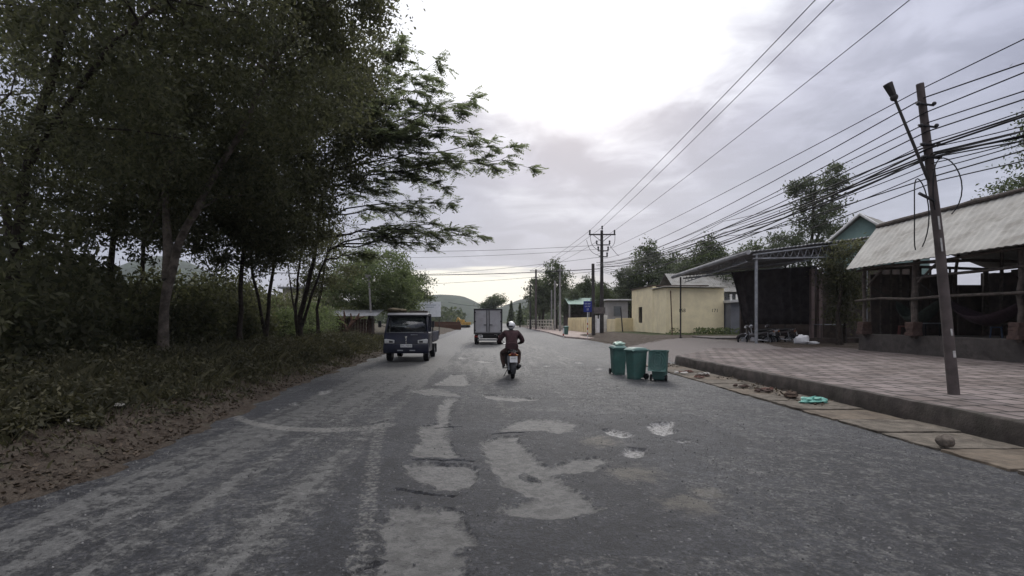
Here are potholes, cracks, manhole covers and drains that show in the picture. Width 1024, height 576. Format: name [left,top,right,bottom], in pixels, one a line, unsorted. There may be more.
pothole [640,421,684,437]
pothole [612,445,653,460]
pothole [596,427,641,439]
crack [390,487,458,498]
